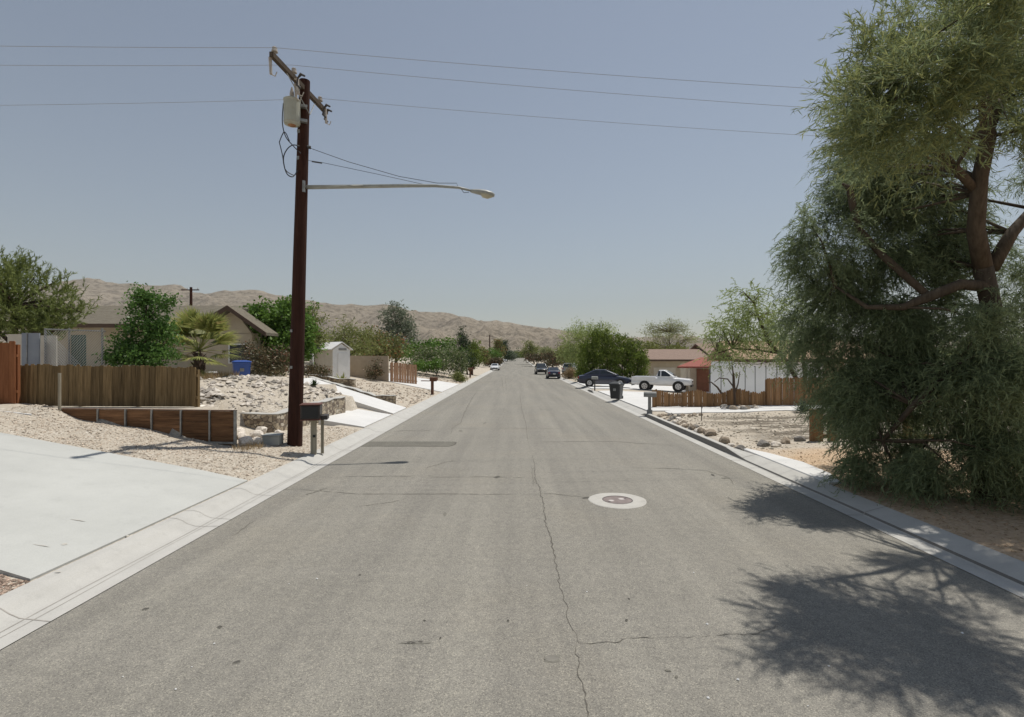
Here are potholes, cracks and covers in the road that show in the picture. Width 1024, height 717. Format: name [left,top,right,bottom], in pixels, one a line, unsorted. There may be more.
manhole cover [588,493,647,509]
crack [307,462,657,717]
